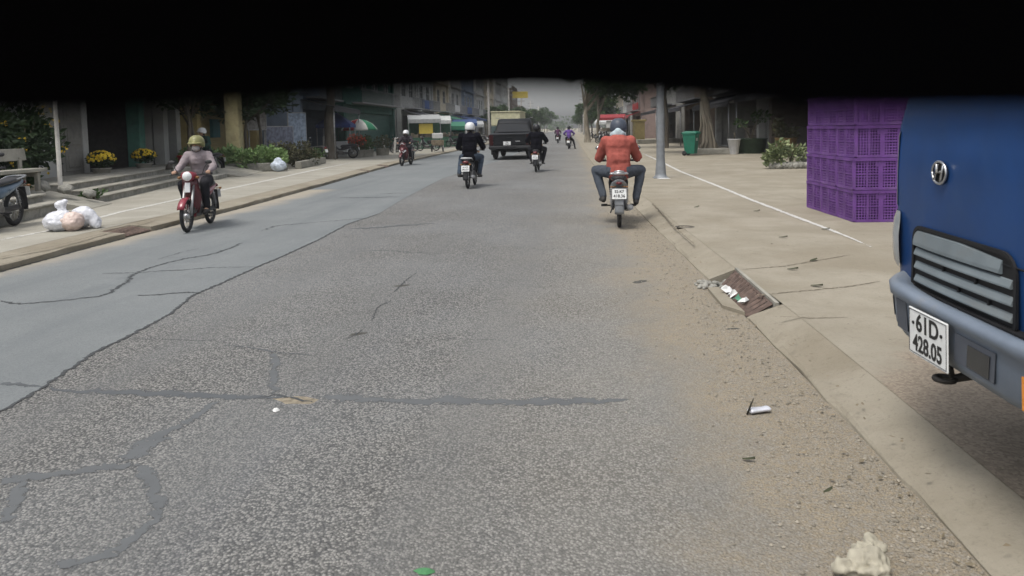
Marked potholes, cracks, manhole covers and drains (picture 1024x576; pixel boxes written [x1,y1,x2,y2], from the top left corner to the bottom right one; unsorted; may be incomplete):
crack [258,394,312,402]
crack [149,339,309,355]
drain grate [694,268,779,318]
crack [1,243,255,305]
crack [261,218,432,231]
